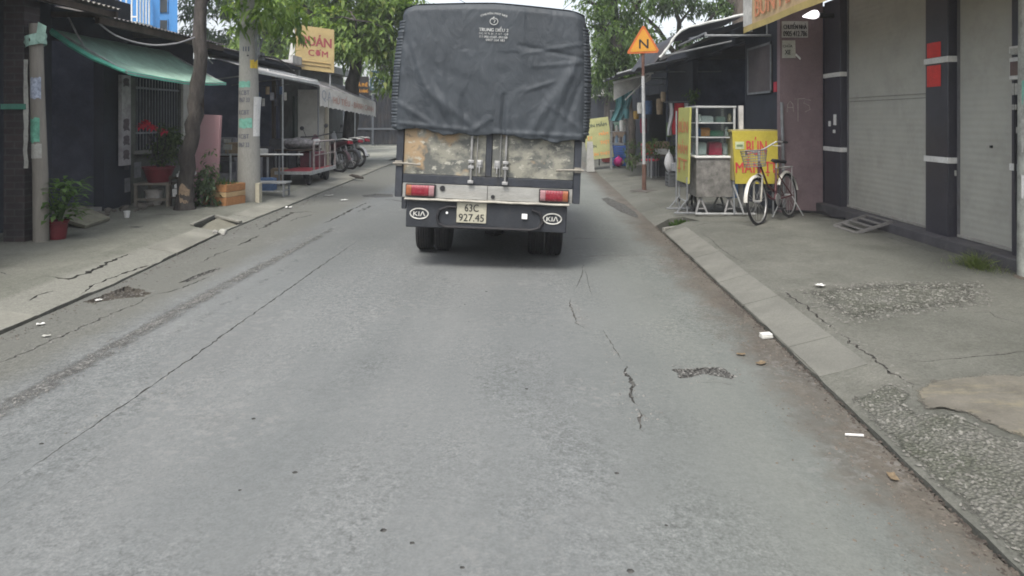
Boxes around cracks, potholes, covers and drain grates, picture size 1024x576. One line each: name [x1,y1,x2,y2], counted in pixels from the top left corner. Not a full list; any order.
crack [2,199,398,362]
pothole [84,286,152,303]
crack [569,265,592,327]
crack [603,329,643,430]
pothole [672,367,735,379]
